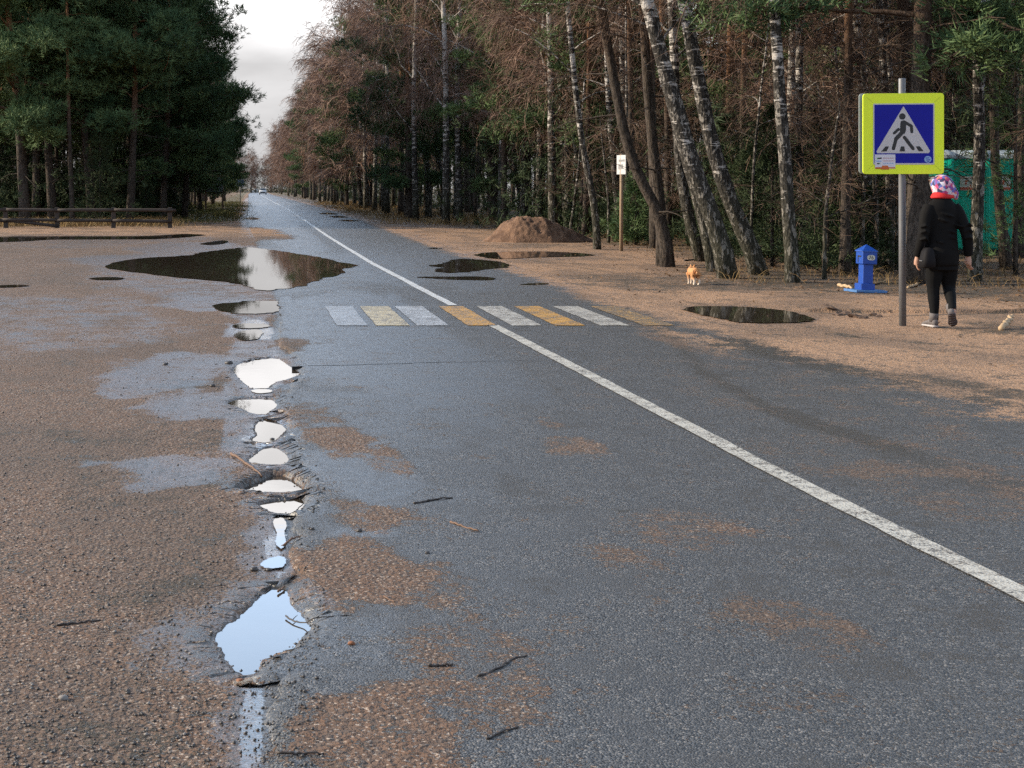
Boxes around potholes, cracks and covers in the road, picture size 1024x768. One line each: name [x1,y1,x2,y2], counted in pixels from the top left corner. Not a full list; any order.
pothole [220,356,314,390]
pothole [229,440,308,468]
pothole [219,465,326,499]
pothole [212,394,293,416]
pothole [234,414,303,445]
pothole [237,488,329,520]
pothole [182,574,343,688]
